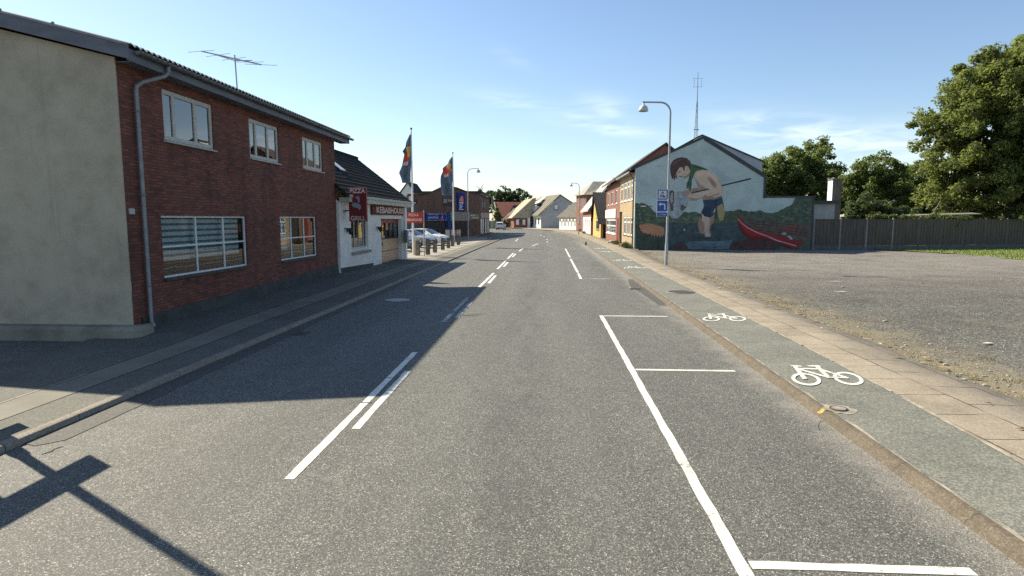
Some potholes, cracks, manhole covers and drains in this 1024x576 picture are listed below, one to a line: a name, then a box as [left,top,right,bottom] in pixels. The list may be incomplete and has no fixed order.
manhole cover [822,404,857,414]
